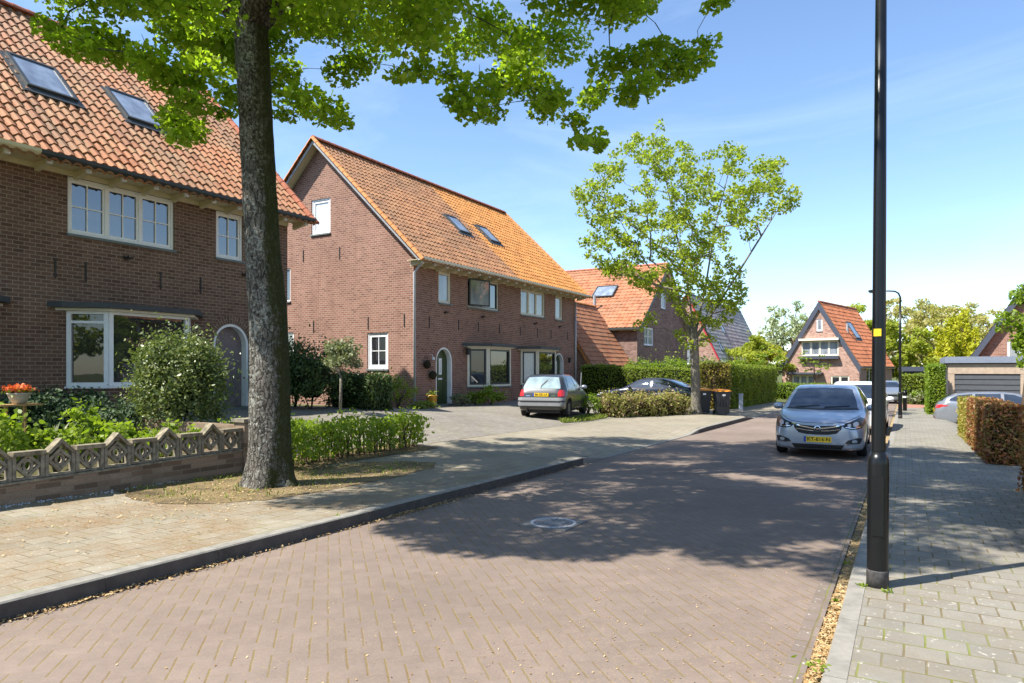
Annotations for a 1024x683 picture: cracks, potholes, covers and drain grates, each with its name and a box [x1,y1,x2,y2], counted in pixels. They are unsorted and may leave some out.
manhole cover [519,515,587,532]
